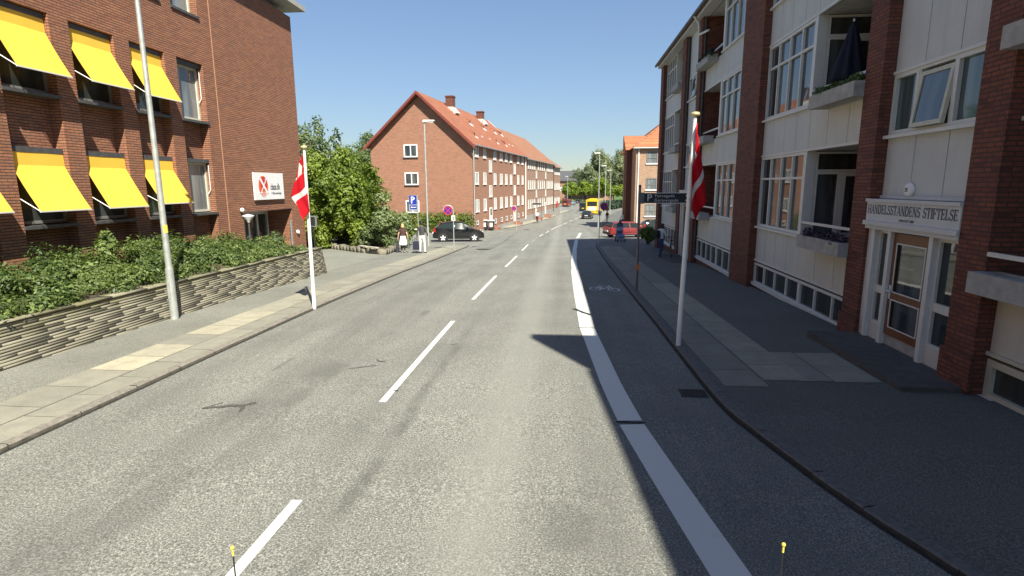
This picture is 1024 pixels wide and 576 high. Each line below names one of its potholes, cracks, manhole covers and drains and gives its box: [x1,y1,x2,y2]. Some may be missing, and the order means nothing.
drain grate [678,389,709,398]
